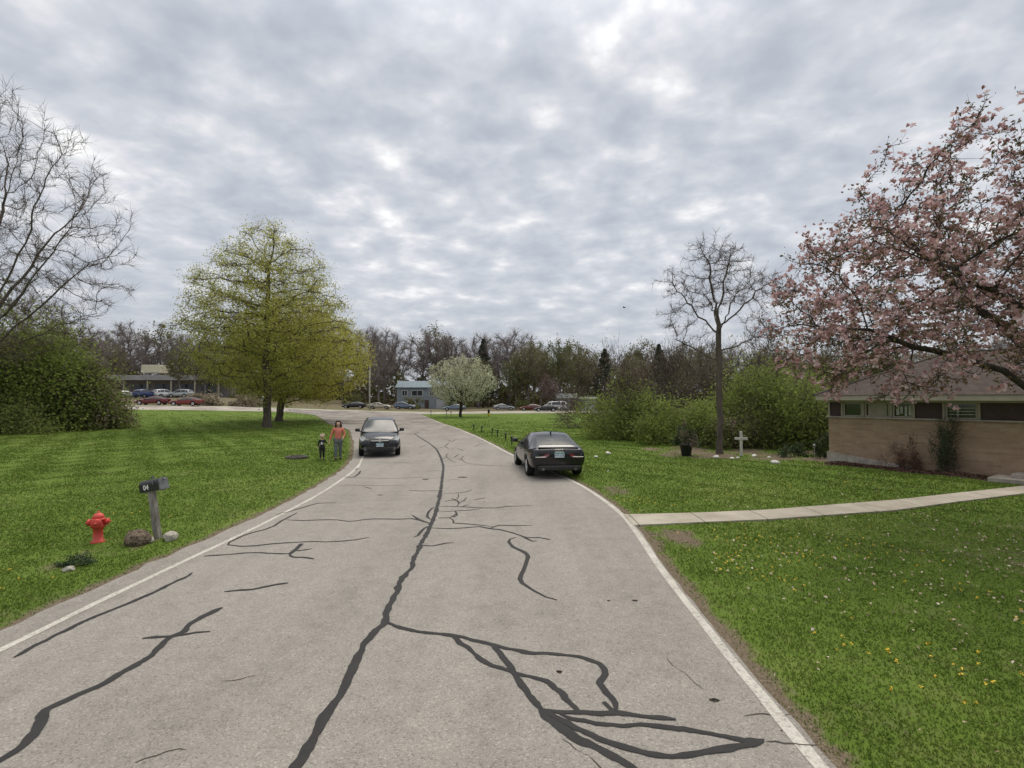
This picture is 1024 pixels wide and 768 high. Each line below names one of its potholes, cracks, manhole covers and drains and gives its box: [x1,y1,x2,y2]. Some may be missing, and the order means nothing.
crack [135,748,186,763]
crack [441,489,550,541]
crack [344,422,495,489]
